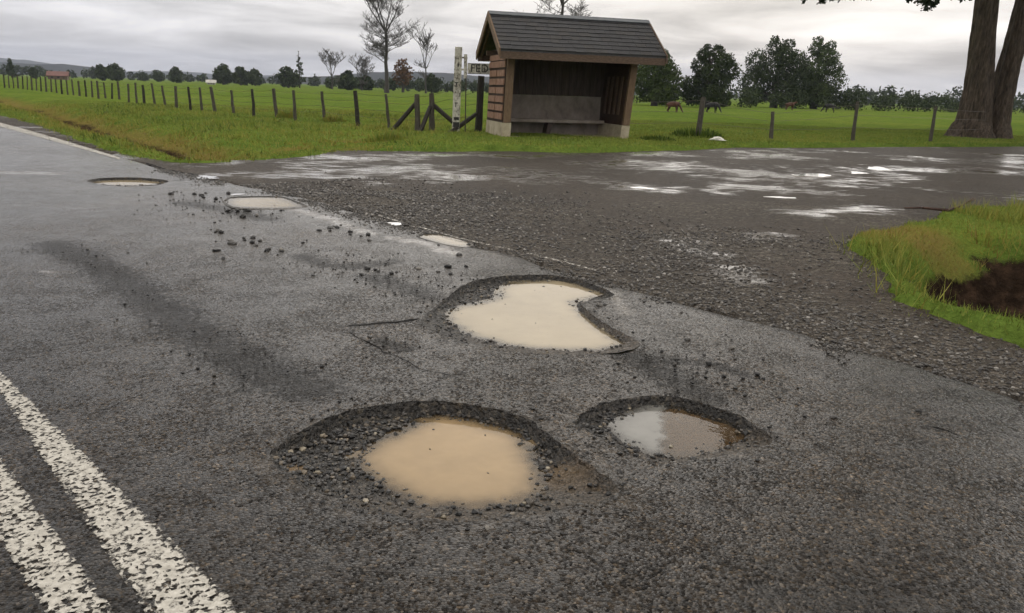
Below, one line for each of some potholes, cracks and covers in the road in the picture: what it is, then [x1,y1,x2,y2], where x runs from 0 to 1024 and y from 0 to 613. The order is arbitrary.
pothole [87,177,168,187]
pothole [222,196,308,210]
pothole [421,275,641,355]
crack [345,318,485,375]
pothole [572,395,773,462]
pothole [416,233,473,248]
pothole [270,400,619,522]
